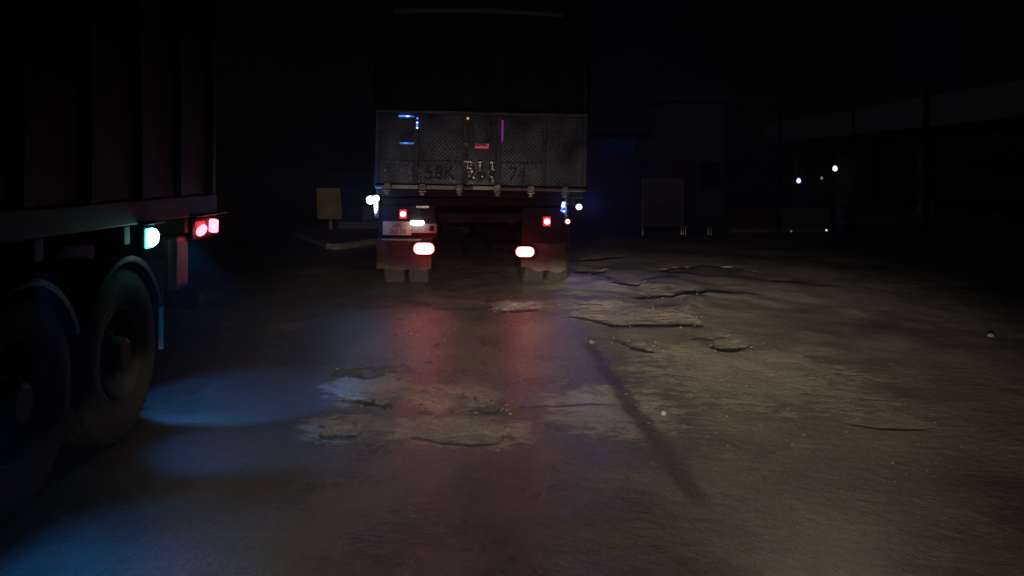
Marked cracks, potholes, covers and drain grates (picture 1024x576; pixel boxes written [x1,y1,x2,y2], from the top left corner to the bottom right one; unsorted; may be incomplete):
pothole [626,342,656,354]
pothole [476,401,501,414]
pothole [318,424,363,440]
pothole [339,397,394,409]
pothole [711,345,750,353]
pothole [330,366,390,379]
pothole [409,429,507,447]
pothole [496,301,540,313]
